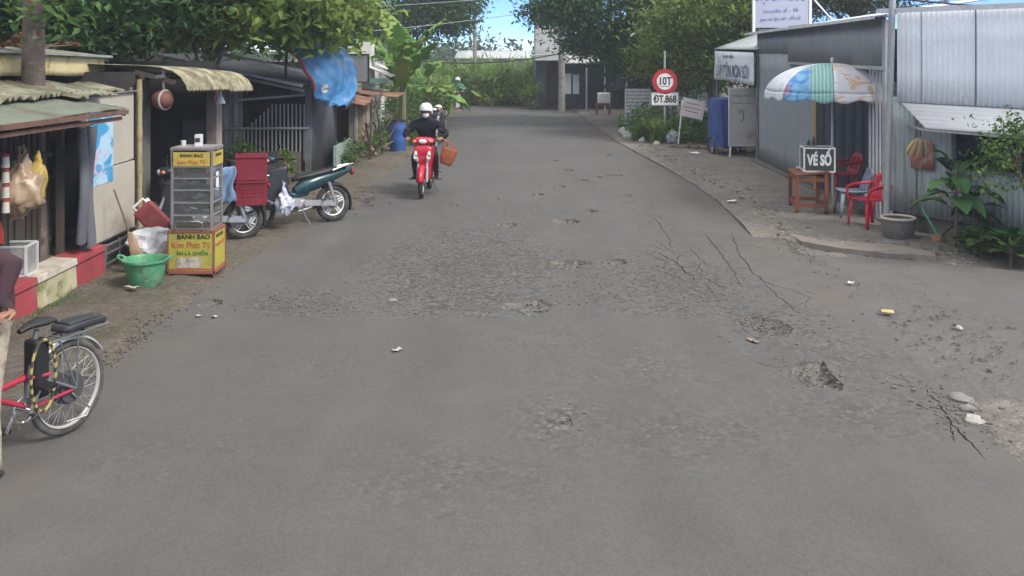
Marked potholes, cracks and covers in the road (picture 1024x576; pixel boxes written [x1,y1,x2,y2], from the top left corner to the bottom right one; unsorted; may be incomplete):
pothole [601,258,627,266]
pothole [498,298,552,316]
pothole [543,412,573,431]
pothole [546,259,593,270]
pothole [788,361,844,391]
pothole [729,315,793,338]
crack [645,217,815,311]
crack [885,373,986,460]
